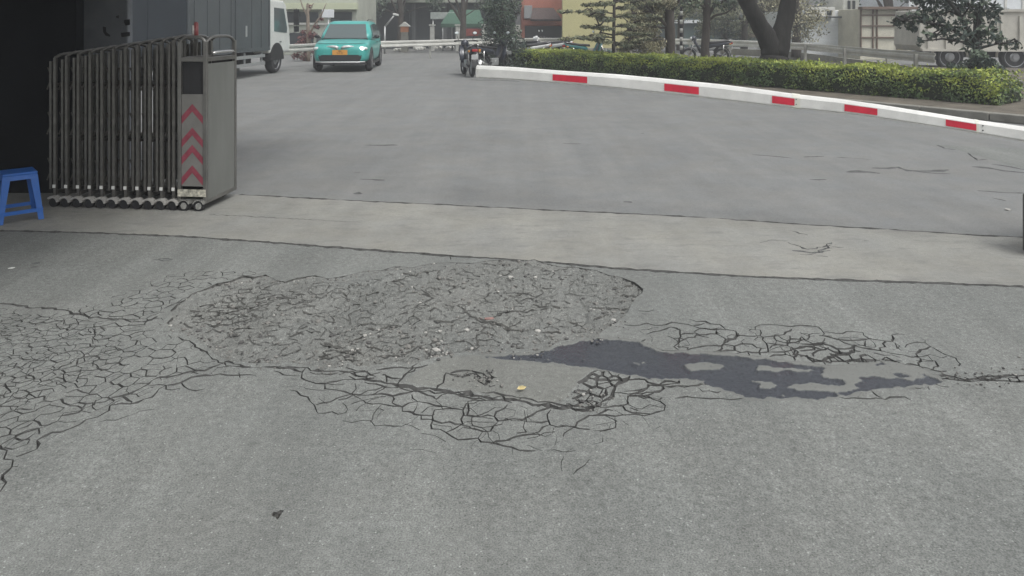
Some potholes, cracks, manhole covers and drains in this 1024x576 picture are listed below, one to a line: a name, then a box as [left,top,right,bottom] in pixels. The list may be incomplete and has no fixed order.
crack [937,145,1024,173]
crack [760,231,841,257]
crack [760,155,950,174]
crack [0,269,1024,492]
